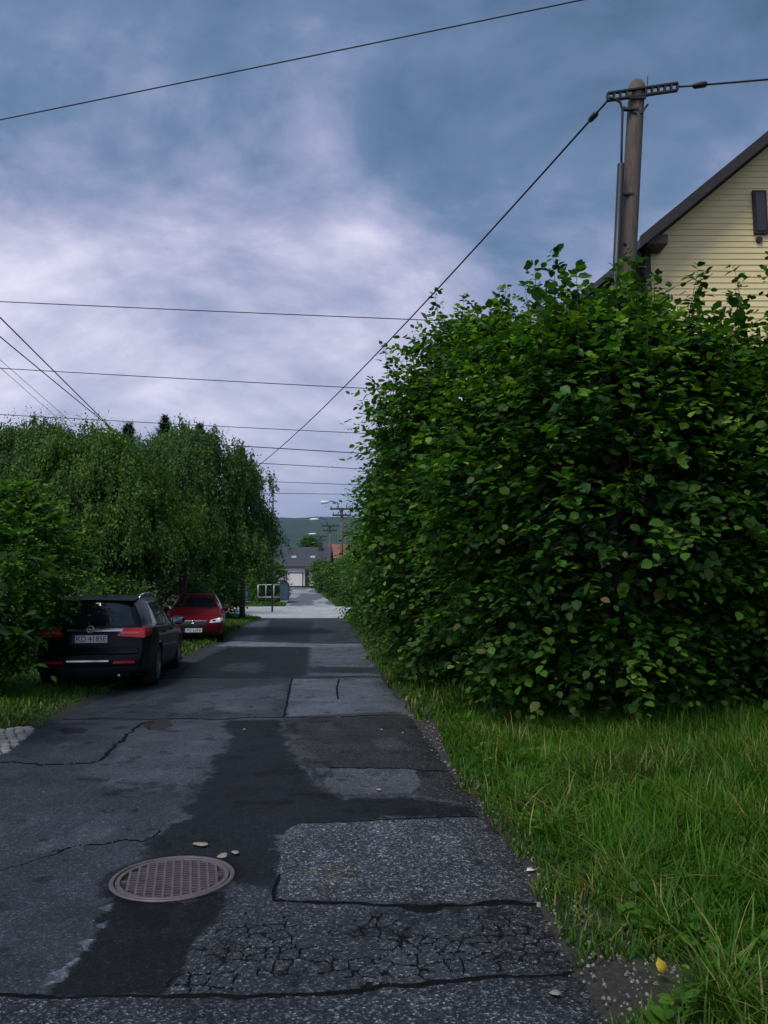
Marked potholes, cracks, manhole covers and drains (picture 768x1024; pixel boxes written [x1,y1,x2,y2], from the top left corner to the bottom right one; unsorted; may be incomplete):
crack [1,830,161,871]
crack [164,874,568,993]
manhole cover [109,856,235,902]
crack [0,676,405,766]
